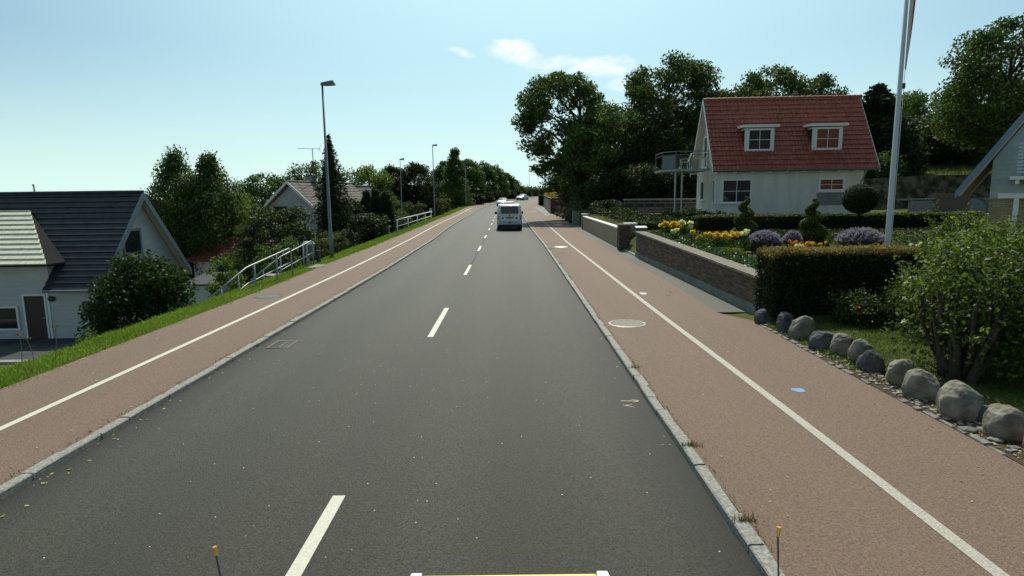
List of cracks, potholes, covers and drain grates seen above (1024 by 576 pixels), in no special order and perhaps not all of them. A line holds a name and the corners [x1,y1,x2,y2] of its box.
drain grate [266,340,304,349]
